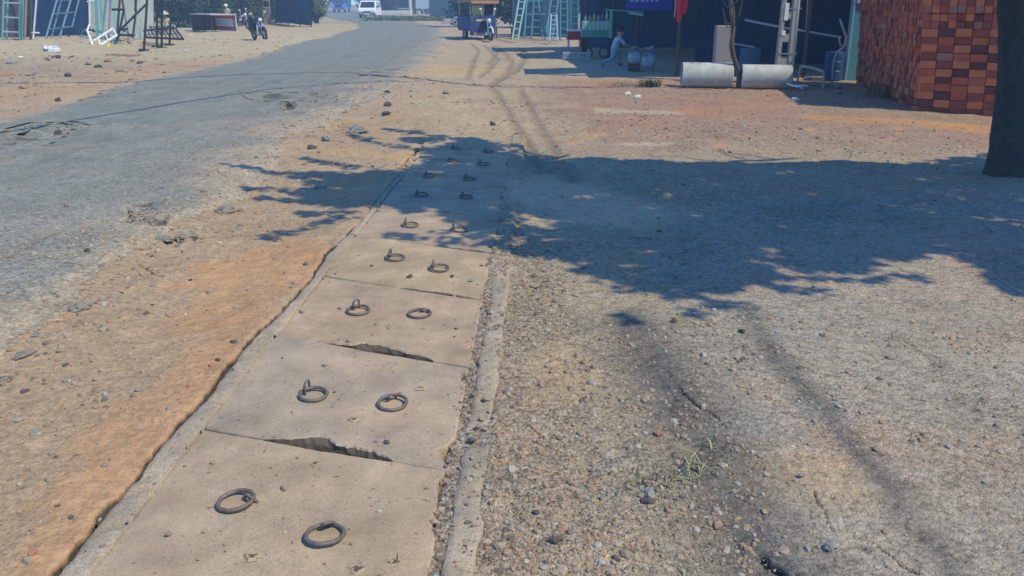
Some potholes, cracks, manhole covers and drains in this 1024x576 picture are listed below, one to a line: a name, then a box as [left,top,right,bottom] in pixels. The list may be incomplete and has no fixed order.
pothole [0,125,76,150]
pothole [116,197,181,229]
